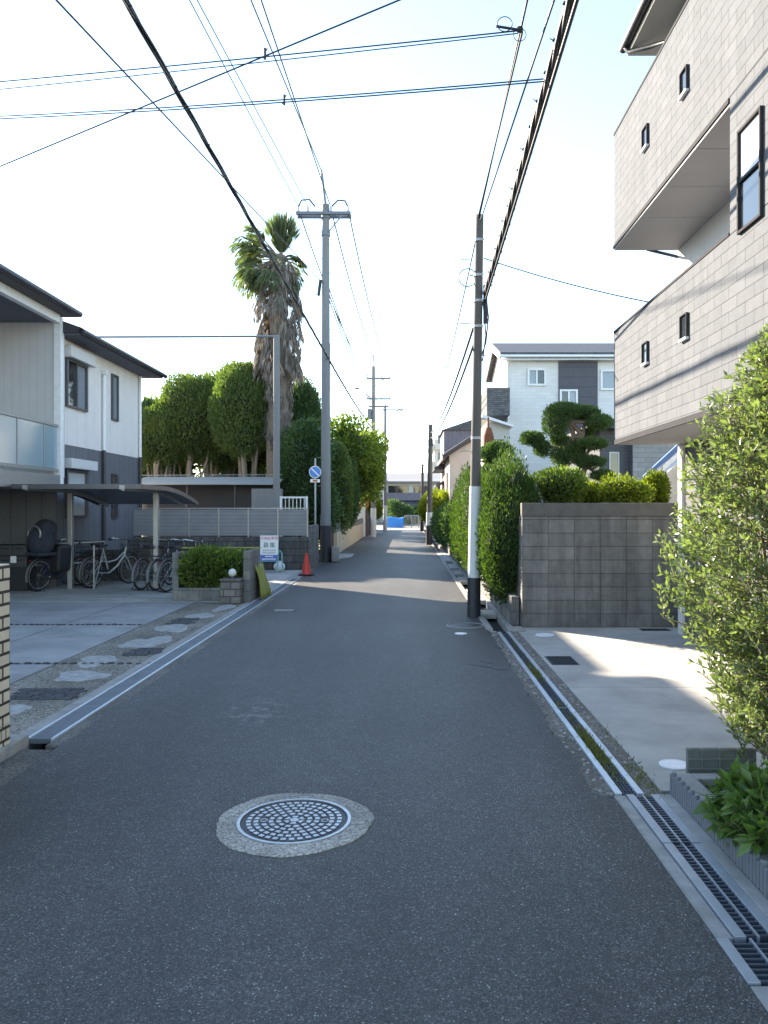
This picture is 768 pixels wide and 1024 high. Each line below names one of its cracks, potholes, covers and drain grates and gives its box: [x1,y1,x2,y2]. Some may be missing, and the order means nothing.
manhole cover [216,793,374,858]
drain grate [626,794,701,846]
drain grate [716,938,768,987]
utility cover [659,759,686,770]
crack [469,660,508,670]
drain grate [663,843,768,943]
